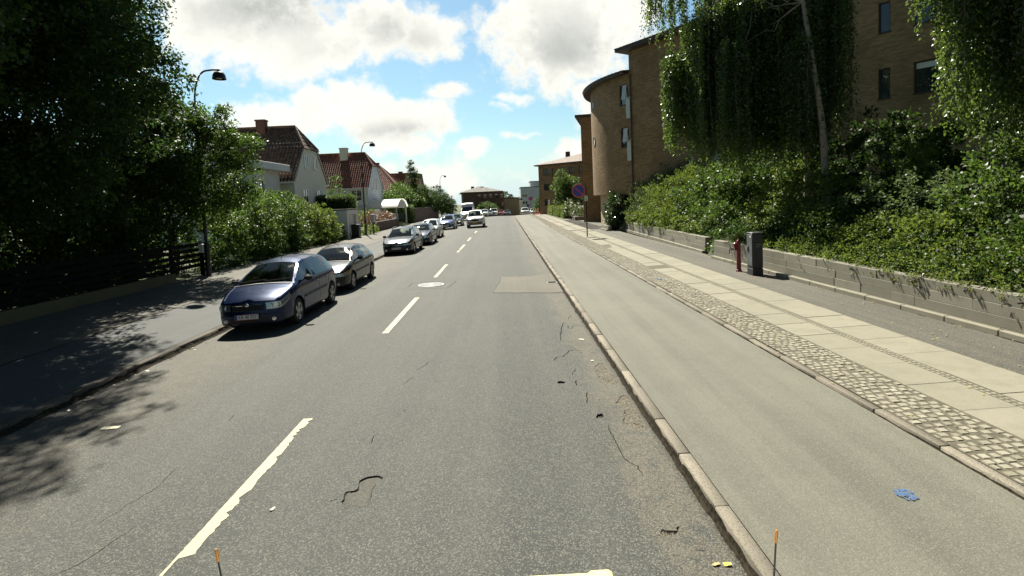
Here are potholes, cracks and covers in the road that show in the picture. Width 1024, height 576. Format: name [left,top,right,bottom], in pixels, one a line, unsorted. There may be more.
crack [554,315,588,404]
crack [53,467,177,576]
